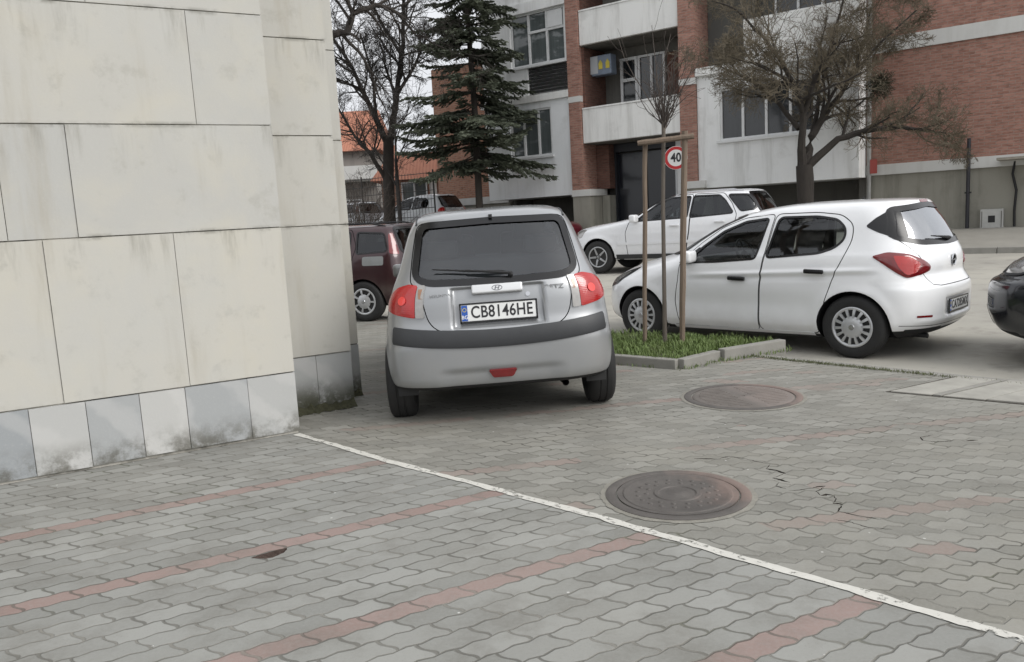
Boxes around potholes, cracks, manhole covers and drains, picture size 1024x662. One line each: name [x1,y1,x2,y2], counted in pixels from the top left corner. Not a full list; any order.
pothole [253,548,287,559]
manhole cover [680,384,808,411]
manhole cover [600,470,758,523]
crack [694,456,883,529]
